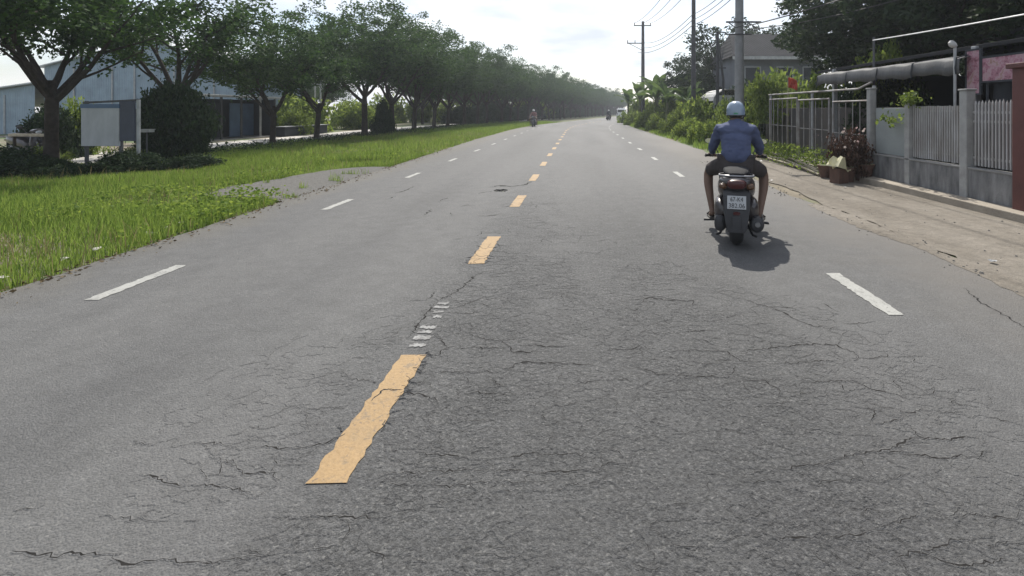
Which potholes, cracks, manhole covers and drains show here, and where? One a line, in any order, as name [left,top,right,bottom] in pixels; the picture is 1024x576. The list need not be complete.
crack [0,181,1024,576]
